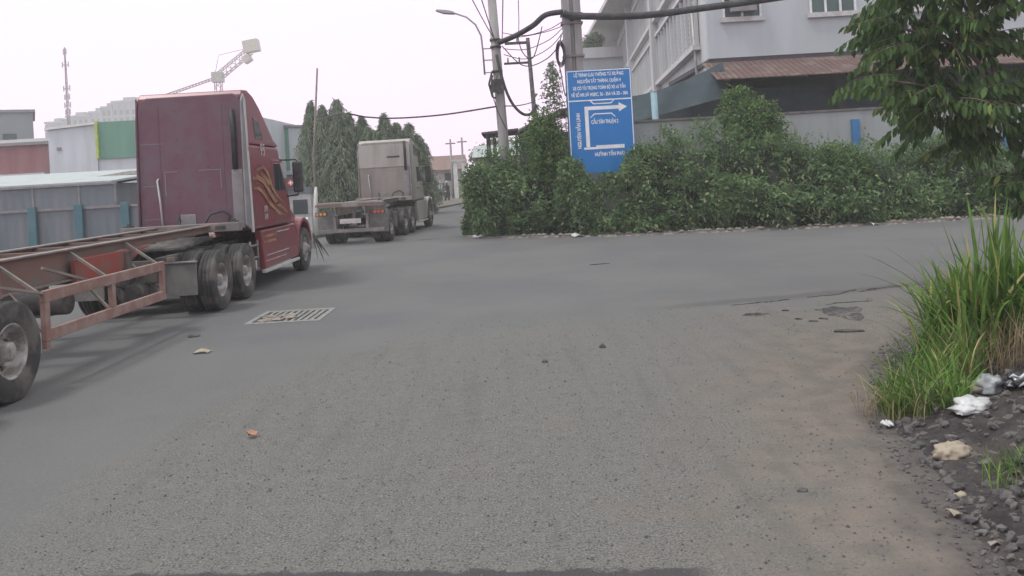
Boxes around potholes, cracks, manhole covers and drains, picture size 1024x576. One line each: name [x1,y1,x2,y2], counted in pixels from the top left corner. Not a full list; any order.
drain grate [243,307,336,325]
crack [735,284,916,305]
pothole [822,306,864,321]
